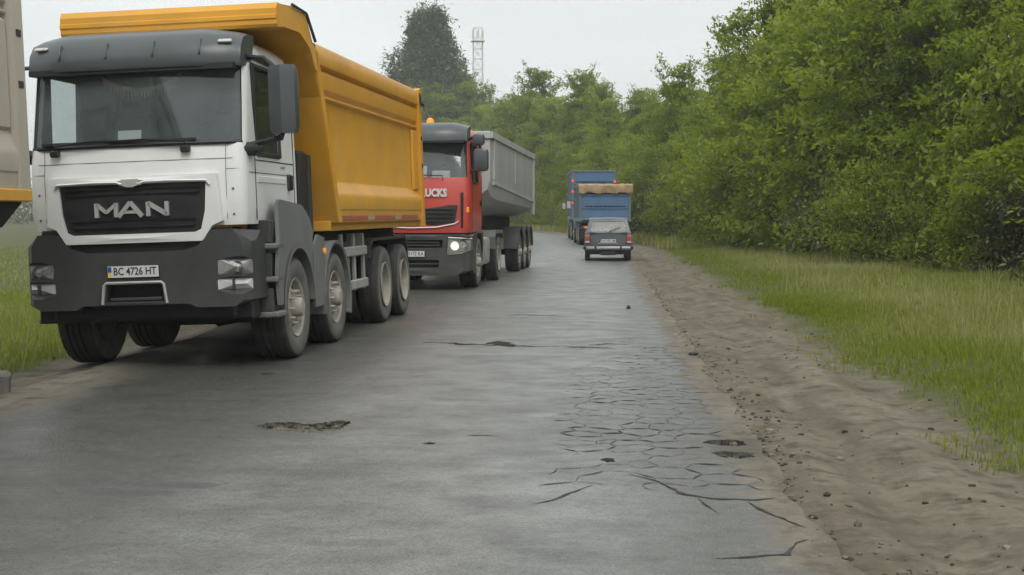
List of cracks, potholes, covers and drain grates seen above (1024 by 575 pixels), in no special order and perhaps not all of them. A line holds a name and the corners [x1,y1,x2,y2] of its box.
pothole [711,451,756,459]
pothole [256,420,350,433]
crack [539,337,808,559]
